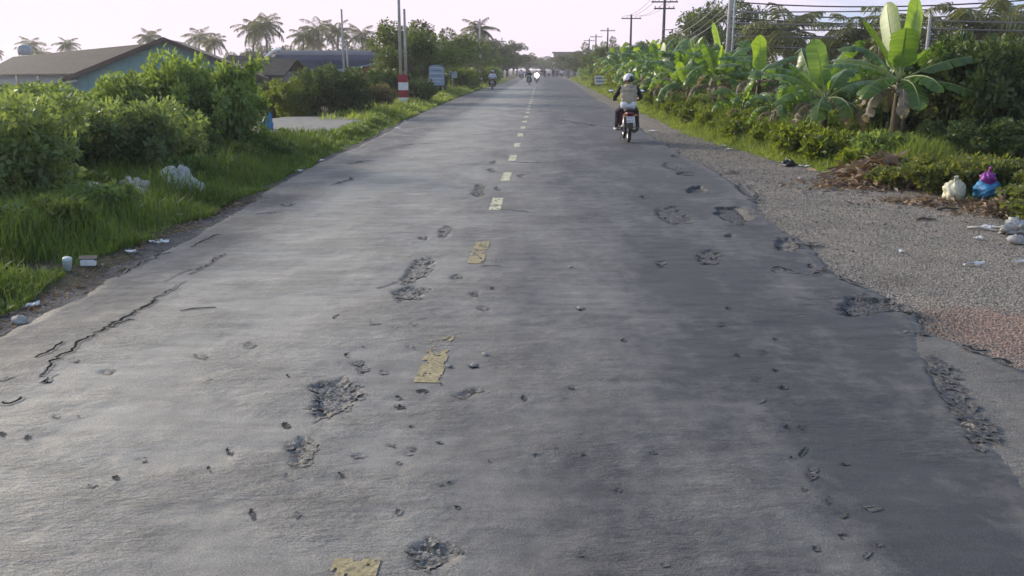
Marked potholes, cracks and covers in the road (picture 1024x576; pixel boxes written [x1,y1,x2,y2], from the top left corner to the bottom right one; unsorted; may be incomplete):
pothole [694,249,722,265]
pothole [404,536,464,573]
pothole [391,285,431,302]
pothole [925,352,1008,452]
crack [0,234,227,406]
pothole [654,205,693,226]
pothole [836,296,919,317]
pothole [283,435,319,469]
pothole [304,375,369,423]
pothole [399,256,435,285]
pothole [713,206,756,226]
